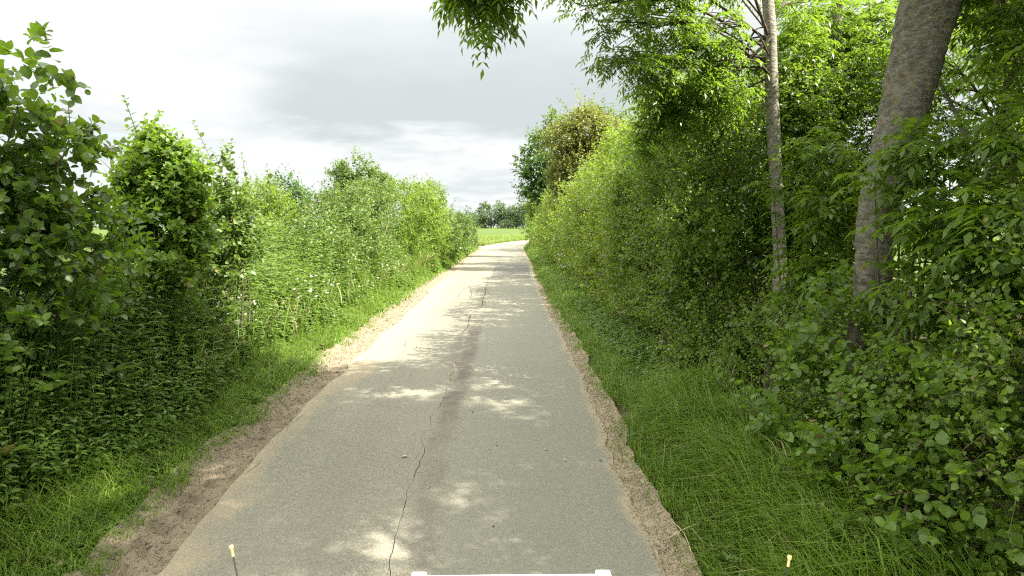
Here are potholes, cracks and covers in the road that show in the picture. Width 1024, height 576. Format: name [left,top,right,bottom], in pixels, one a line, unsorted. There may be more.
crack [387,441,425,576]
